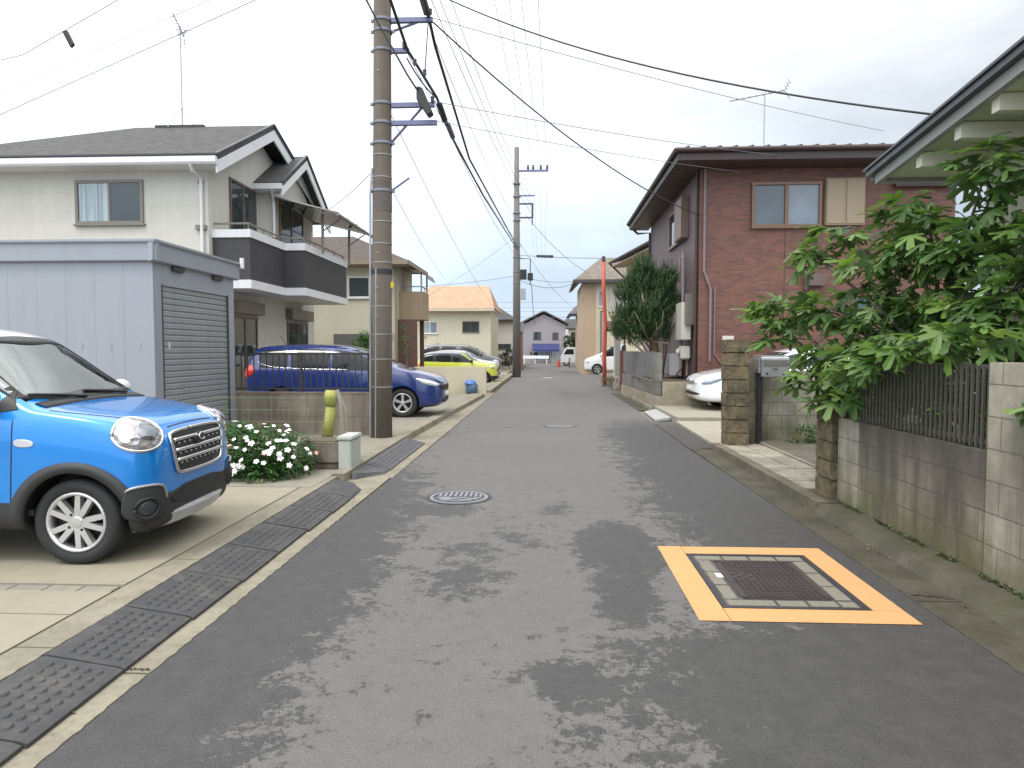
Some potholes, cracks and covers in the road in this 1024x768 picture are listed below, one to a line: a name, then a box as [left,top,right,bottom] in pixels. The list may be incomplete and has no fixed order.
manhole cover [686,553,872,611]
manhole cover [426,490,492,505]
